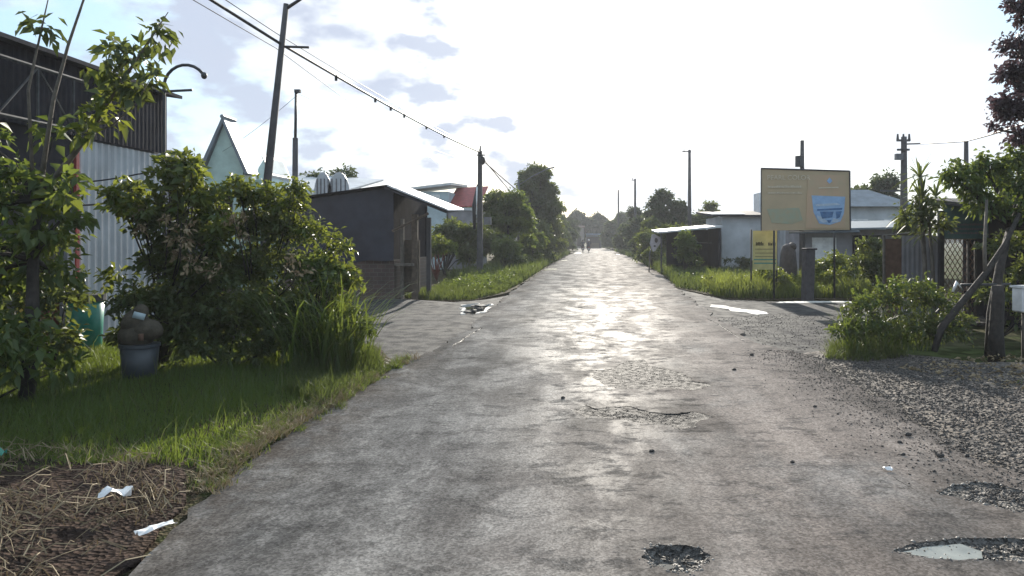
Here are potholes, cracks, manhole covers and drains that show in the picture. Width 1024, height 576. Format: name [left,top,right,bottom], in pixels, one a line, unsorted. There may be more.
pothole [936,480,1024,513]
pothole [892,535,1024,563]
pothole [639,543,715,575]
pothole [571,404,712,430]
